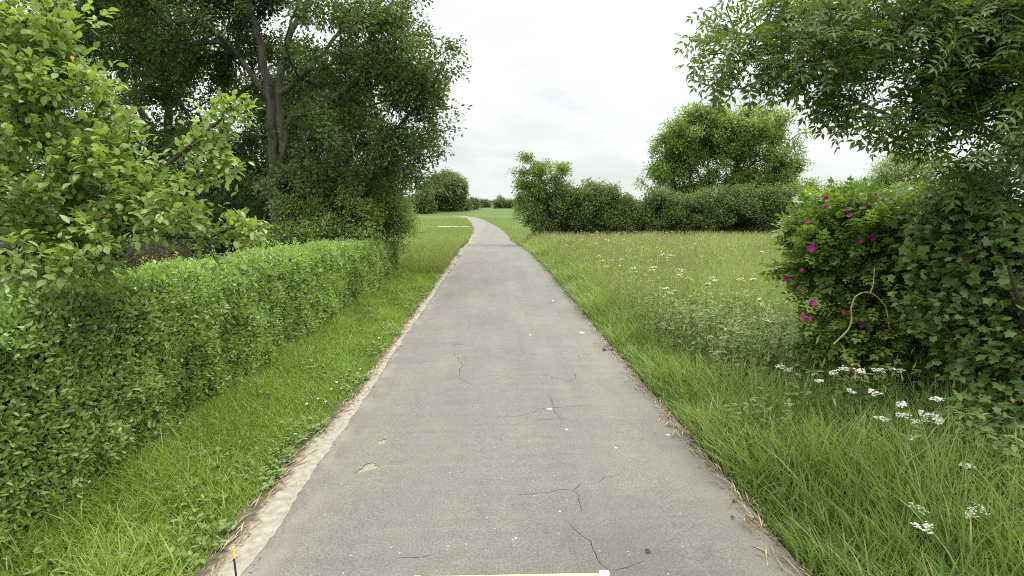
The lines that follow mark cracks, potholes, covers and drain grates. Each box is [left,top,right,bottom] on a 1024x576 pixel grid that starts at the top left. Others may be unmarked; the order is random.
crack [524,473,645,571]
pothole [355,462,378,473]
